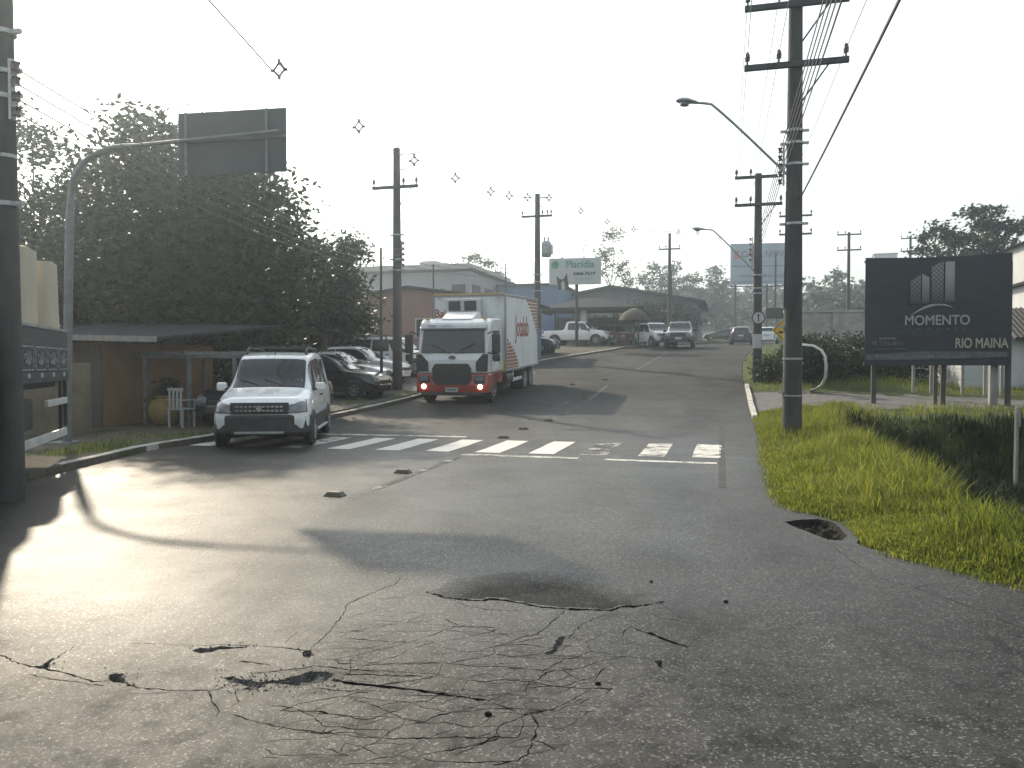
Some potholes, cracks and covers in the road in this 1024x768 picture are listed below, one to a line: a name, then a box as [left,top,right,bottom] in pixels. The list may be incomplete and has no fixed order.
pothole [428,570,661,609]
pothole [785,519,847,540]
pothole [224,671,337,690]
crack [0,579,695,765]
pothole [109,673,128,683]
